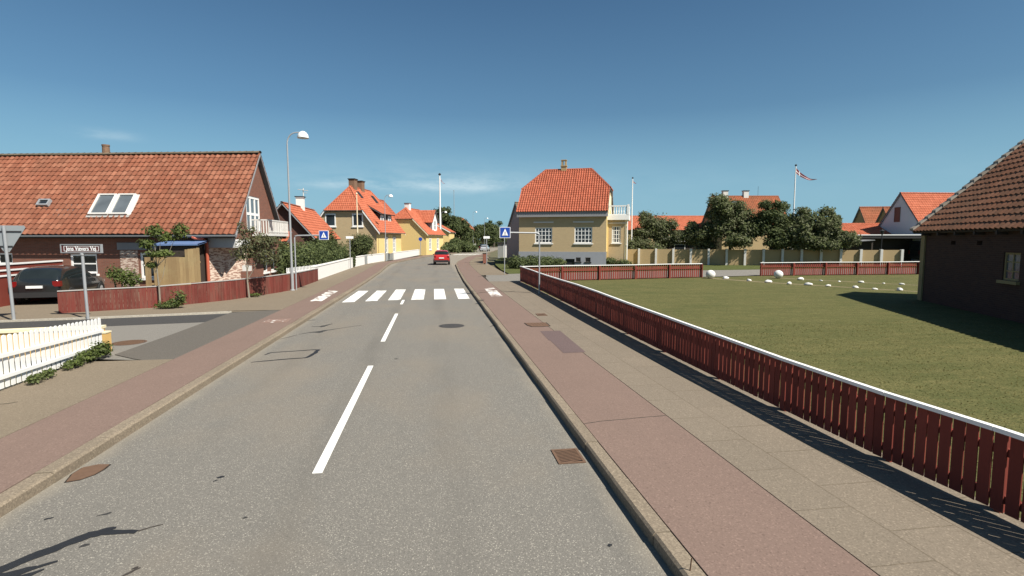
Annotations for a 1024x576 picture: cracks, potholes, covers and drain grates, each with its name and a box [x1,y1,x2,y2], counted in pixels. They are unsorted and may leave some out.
drain grate [551,448,586,464]
